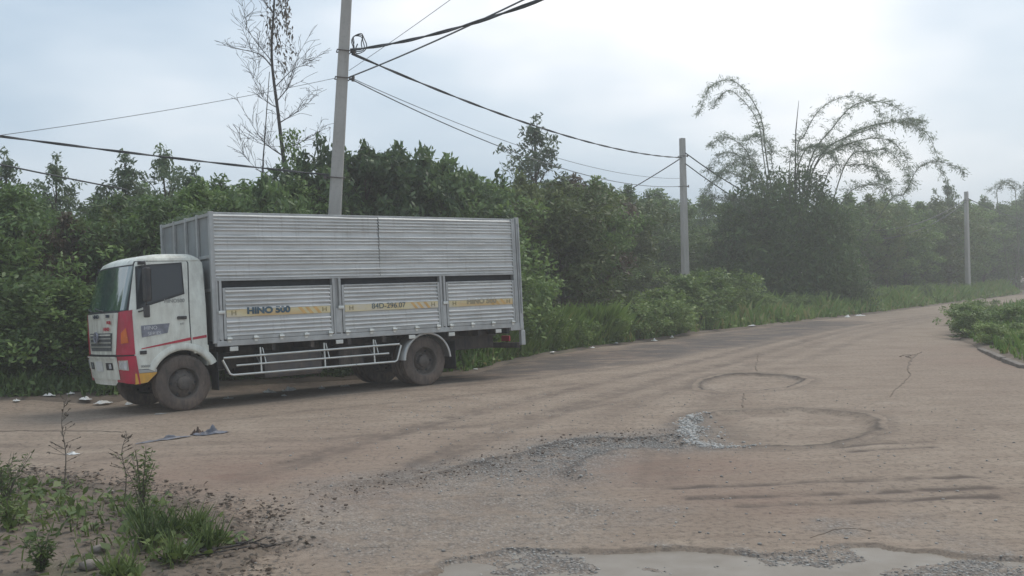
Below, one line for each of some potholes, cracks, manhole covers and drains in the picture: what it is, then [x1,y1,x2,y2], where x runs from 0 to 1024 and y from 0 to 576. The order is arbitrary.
crack [890,352,922,397]
pothole [396,539,1024,576]
